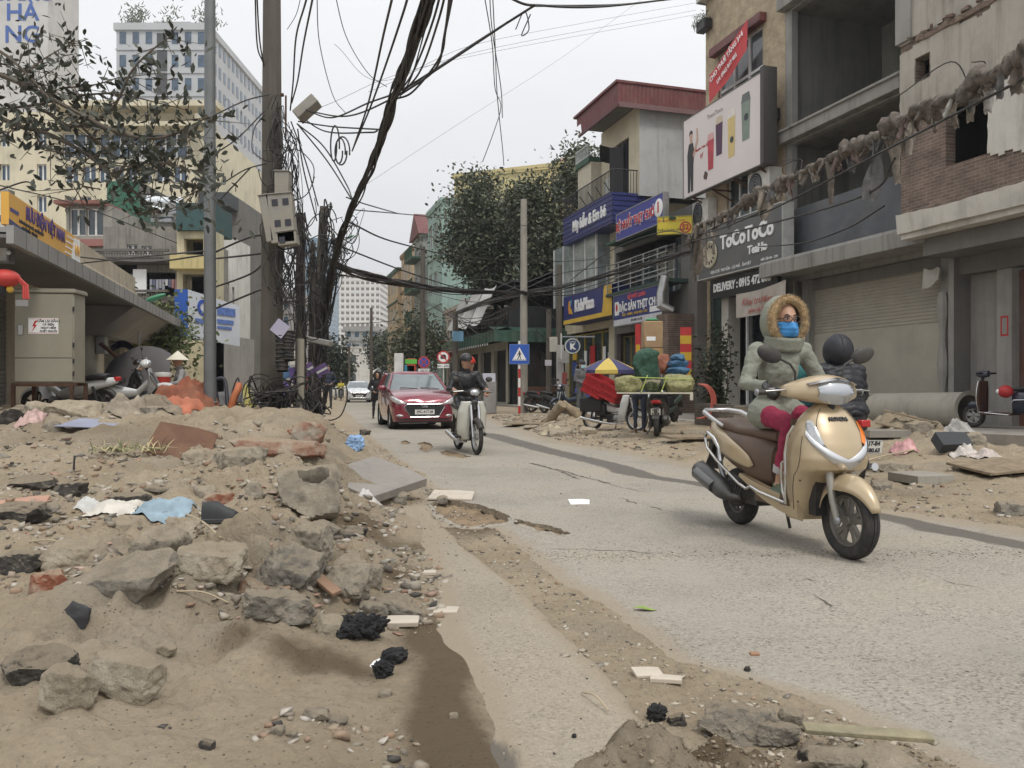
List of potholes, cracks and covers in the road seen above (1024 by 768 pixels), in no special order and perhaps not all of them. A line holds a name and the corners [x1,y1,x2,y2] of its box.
crack [532,463,661,510]
pothole [427,500,518,529]
